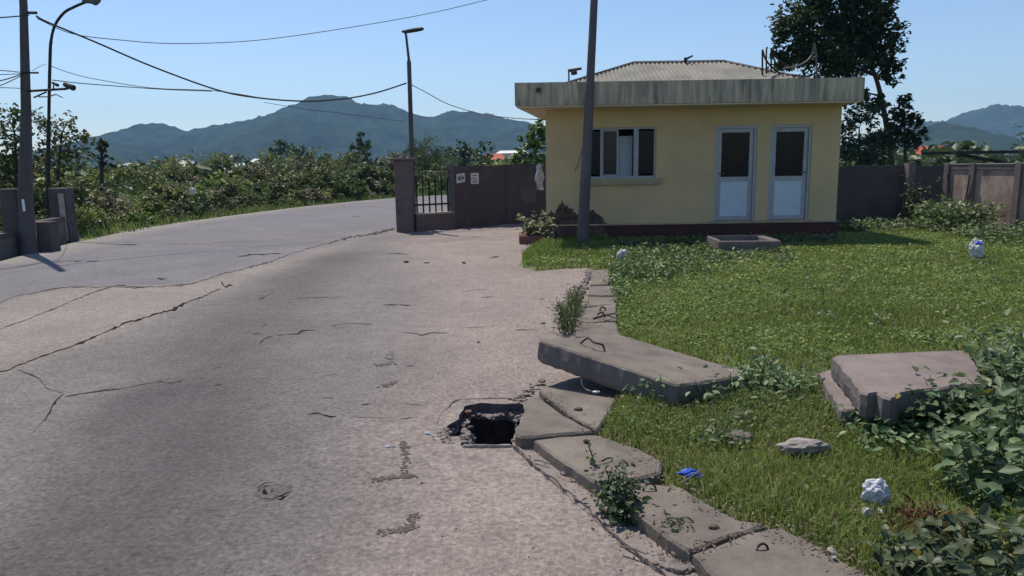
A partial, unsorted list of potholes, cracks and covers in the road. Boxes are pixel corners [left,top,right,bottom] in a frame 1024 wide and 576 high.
pothole [446,403,525,448]
crack [365,353,419,419]
crack [0,282,234,432]
